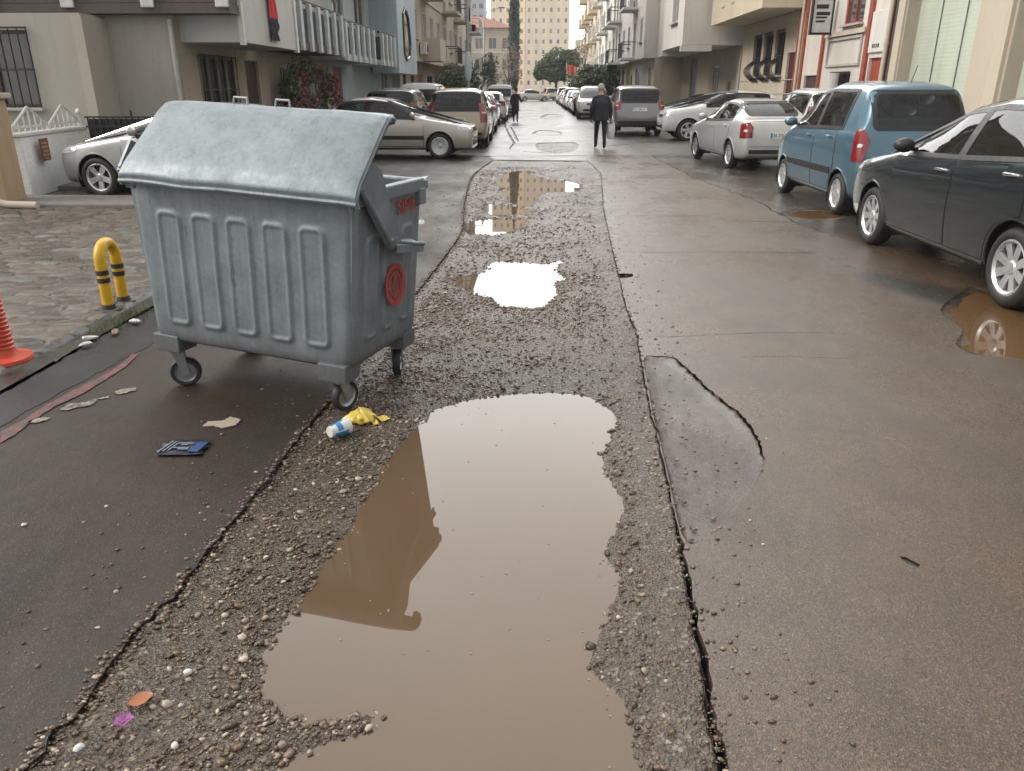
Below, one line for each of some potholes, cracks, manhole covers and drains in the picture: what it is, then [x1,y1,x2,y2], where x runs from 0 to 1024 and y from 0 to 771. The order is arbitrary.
pothole [453,258,567,308]
crack [669,355,765,460]
crack [621,288,726,771]
pothole [780,210,851,219]
pothole [257,392,642,771]
pothole [940,287,1024,361]
pothole [480,202,531,215]
pothole [496,169,584,207]
pothole [464,217,528,235]
